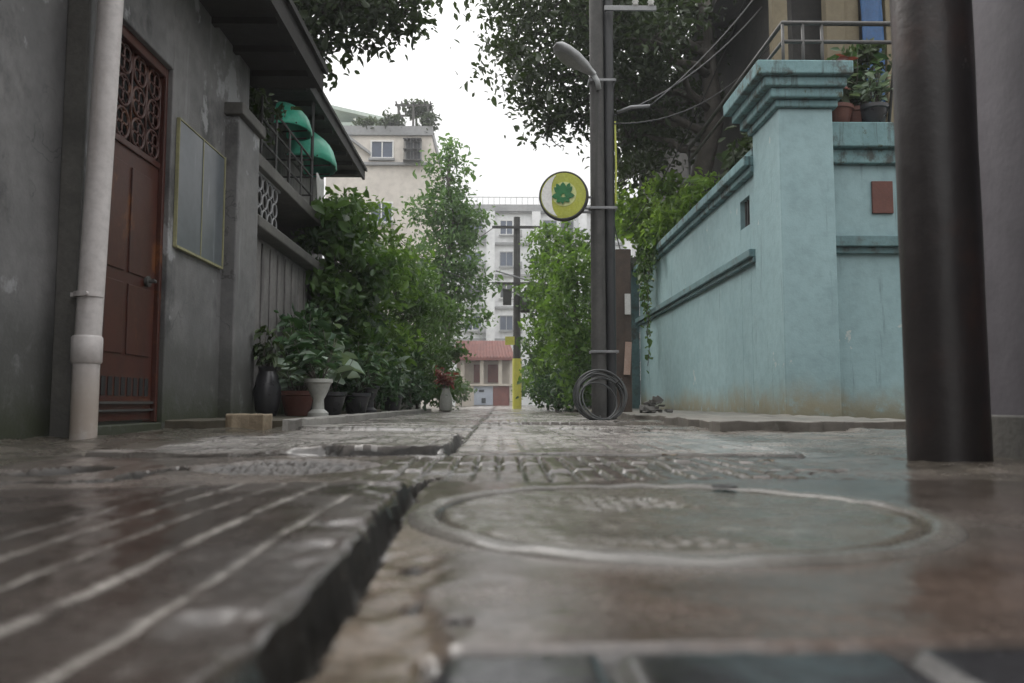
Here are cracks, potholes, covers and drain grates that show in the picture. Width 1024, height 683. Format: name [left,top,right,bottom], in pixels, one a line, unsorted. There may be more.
manhole cover [407,483,969,568]
